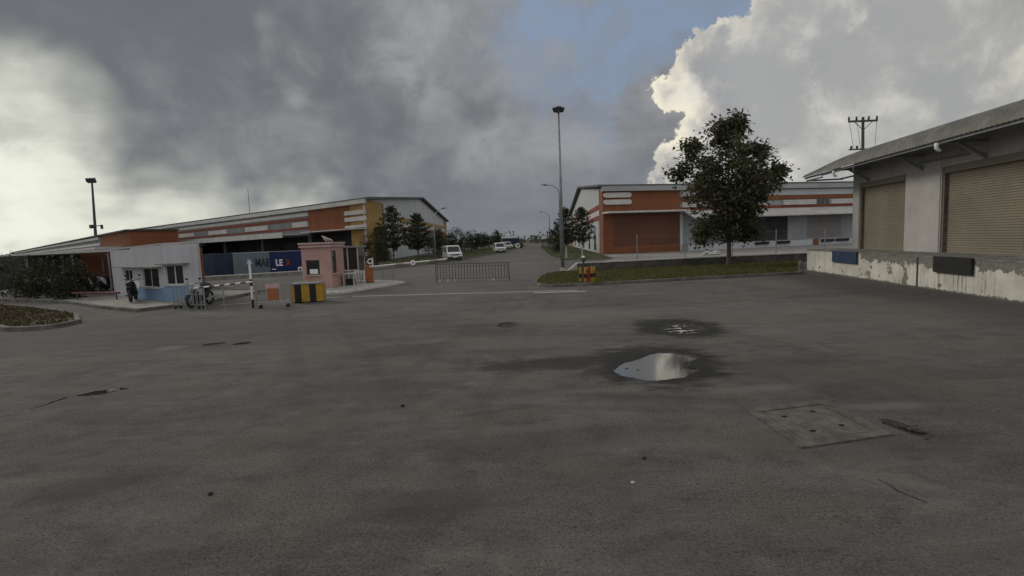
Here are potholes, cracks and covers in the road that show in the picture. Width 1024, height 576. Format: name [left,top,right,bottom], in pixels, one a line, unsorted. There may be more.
pothole [611,351,701,381]
crack [861,479,929,504]
manhole cover [746,399,893,449]
pothole [879,418,935,440]
